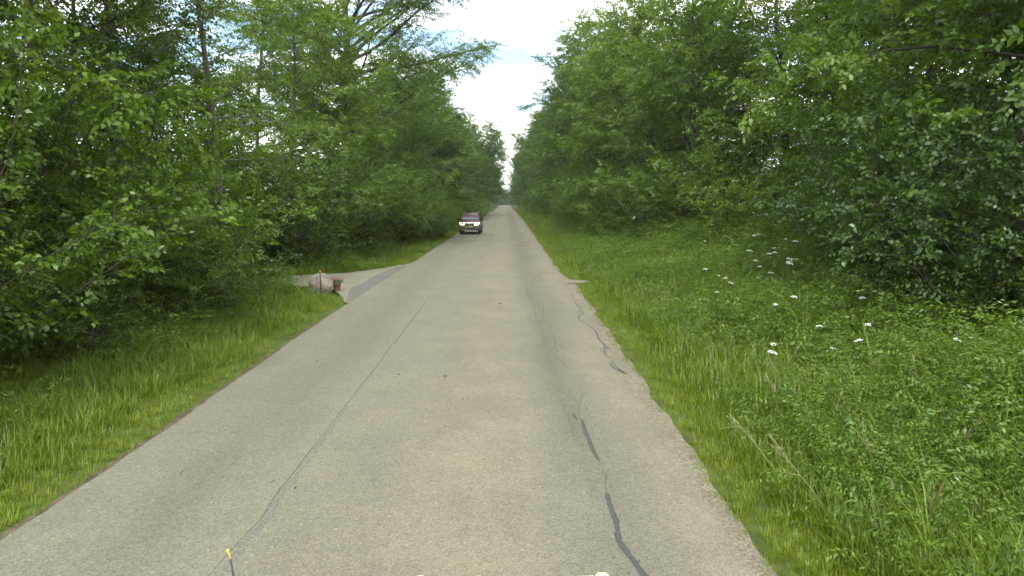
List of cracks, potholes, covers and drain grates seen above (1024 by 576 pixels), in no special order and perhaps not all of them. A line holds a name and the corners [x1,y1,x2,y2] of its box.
crack [561,391,587,439]
crack [524,271,567,368]
